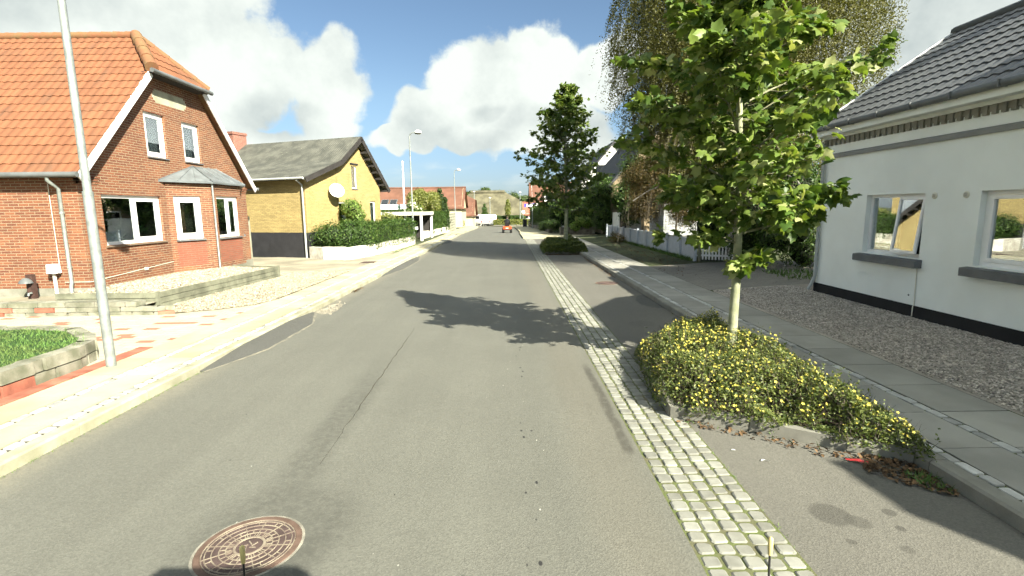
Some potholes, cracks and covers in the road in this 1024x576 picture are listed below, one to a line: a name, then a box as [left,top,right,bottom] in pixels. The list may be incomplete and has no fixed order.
crack [322,331,413,461]
manhole cover [188,516,305,576]
